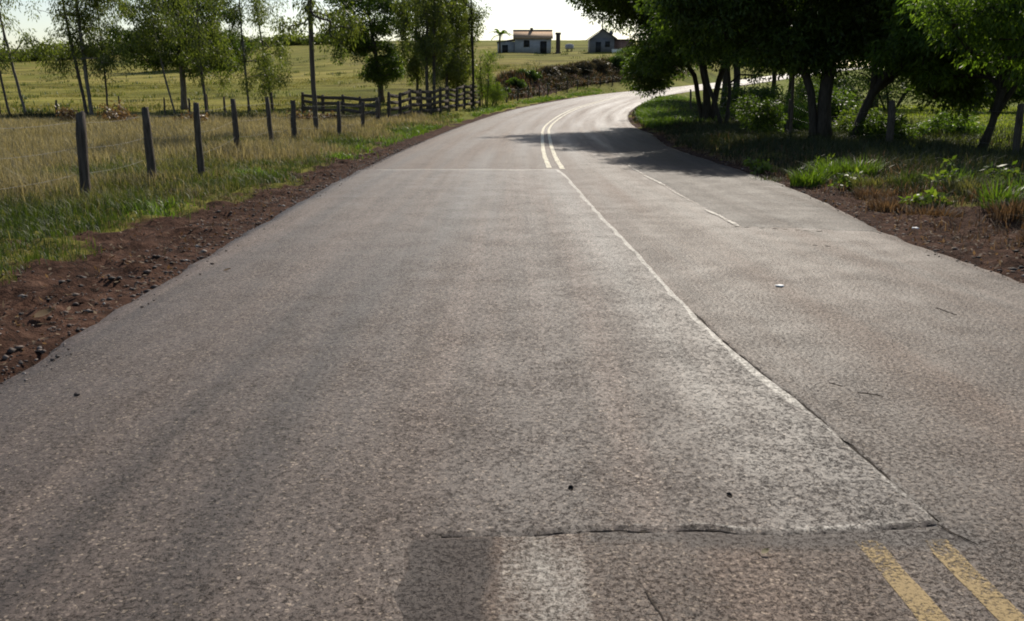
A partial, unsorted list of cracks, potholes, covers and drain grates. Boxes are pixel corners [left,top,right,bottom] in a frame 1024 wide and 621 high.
crack [640,581,665,621]
